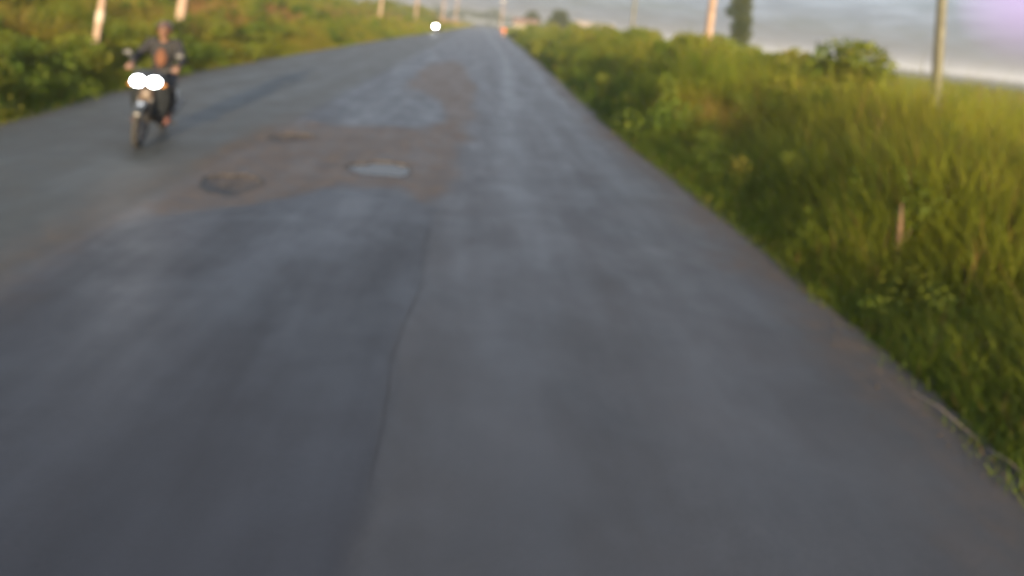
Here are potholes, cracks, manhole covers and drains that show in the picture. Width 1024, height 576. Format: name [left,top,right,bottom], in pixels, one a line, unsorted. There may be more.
pothole [266,133,319,142]
pothole [342,160,413,178]
pothole [197,173,266,198]
crack [369,222,432,490]
